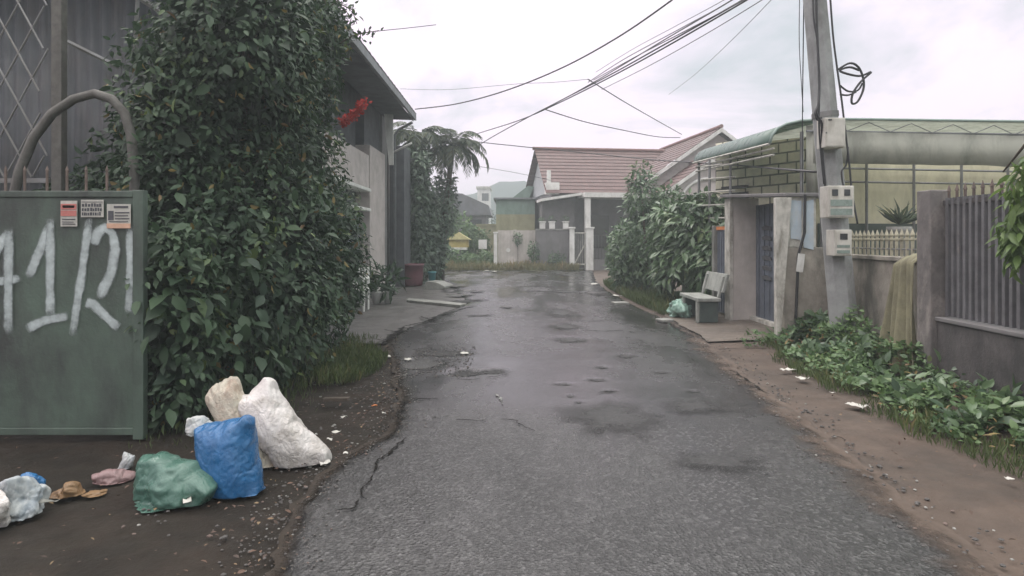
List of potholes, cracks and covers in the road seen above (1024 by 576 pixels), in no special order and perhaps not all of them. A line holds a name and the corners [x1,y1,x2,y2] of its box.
pothole [403,357,442,369]
crack [335,398,436,511]
